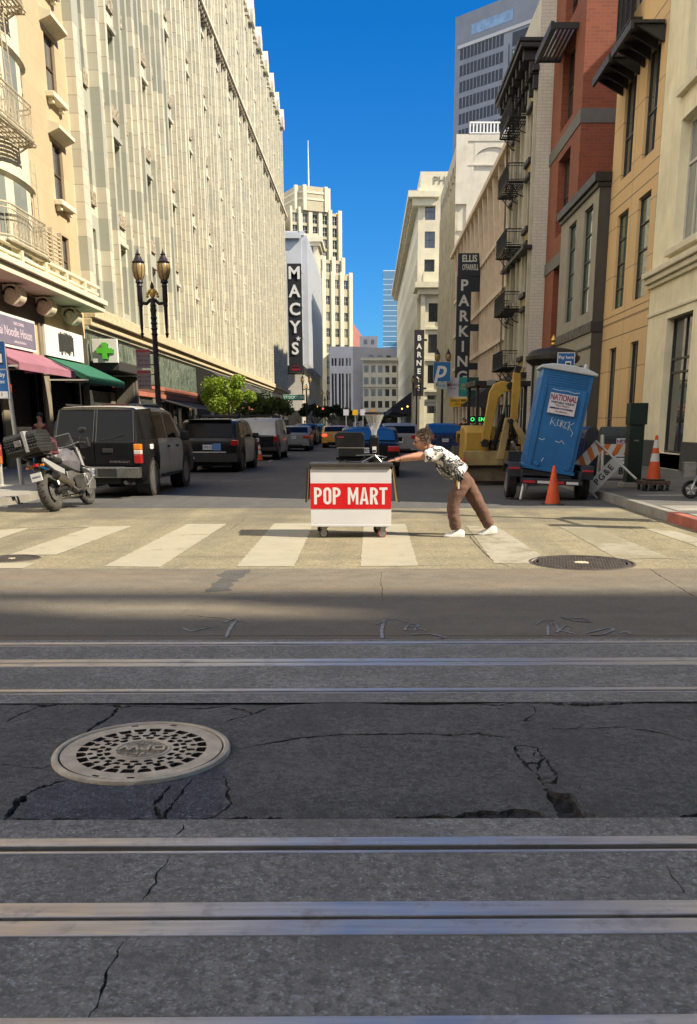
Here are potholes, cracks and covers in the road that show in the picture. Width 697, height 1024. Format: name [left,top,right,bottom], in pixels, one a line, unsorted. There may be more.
crack [232,732,559,789]
crack [88,776,234,1018]
manhole cover [529,555,636,570]
crack [667,866,695,900]
crack [498,705,697,743]
crack [138,703,317,722]
manhole cover [0,554,41,562]
pothole [542,788,599,818]
crack [86,708,118,733]
crack [2,764,65,820]
manhole cover [51,721,230,786]
